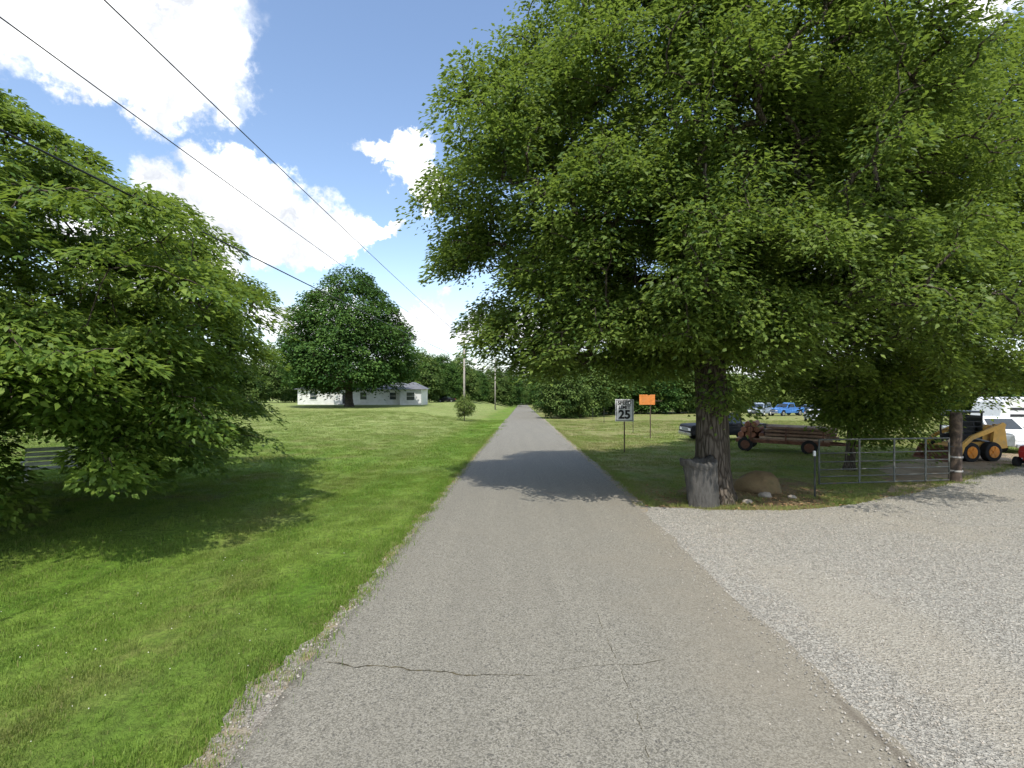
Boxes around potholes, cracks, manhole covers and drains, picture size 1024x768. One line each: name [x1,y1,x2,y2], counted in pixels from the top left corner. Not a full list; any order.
crack [333,615,658,757]
